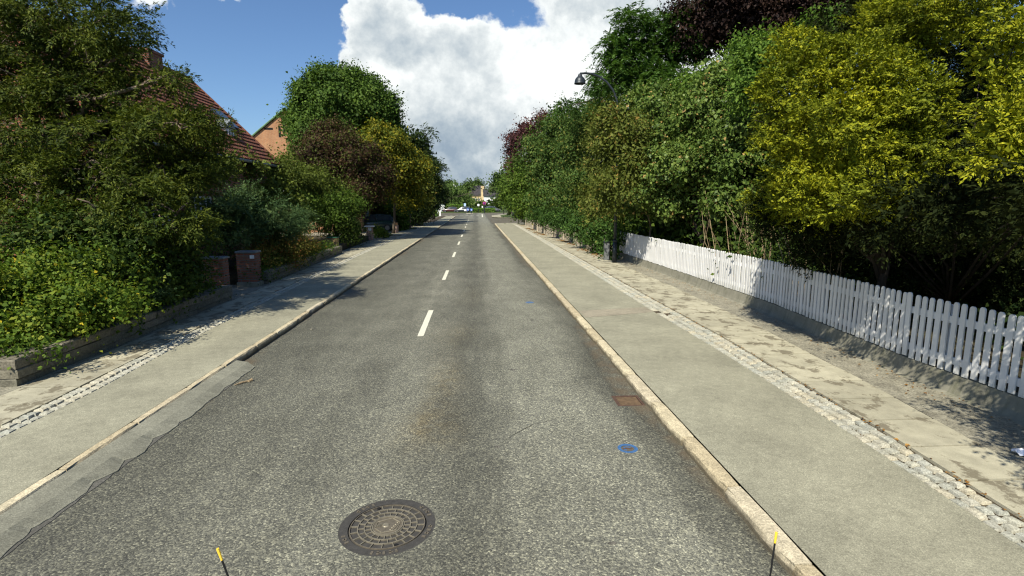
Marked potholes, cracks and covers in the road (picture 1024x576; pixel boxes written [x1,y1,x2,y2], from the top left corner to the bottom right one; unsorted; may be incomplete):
manhole cover [338,499,435,556]
